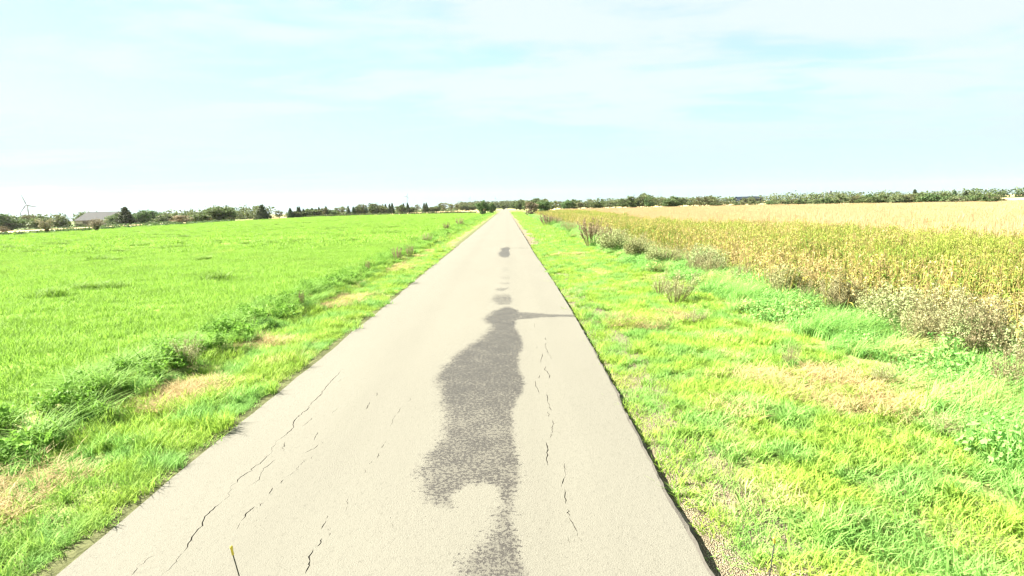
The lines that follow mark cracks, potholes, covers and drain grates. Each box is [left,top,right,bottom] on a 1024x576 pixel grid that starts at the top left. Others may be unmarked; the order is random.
crack [534,326,578,540]
crack [164,370,341,573]
